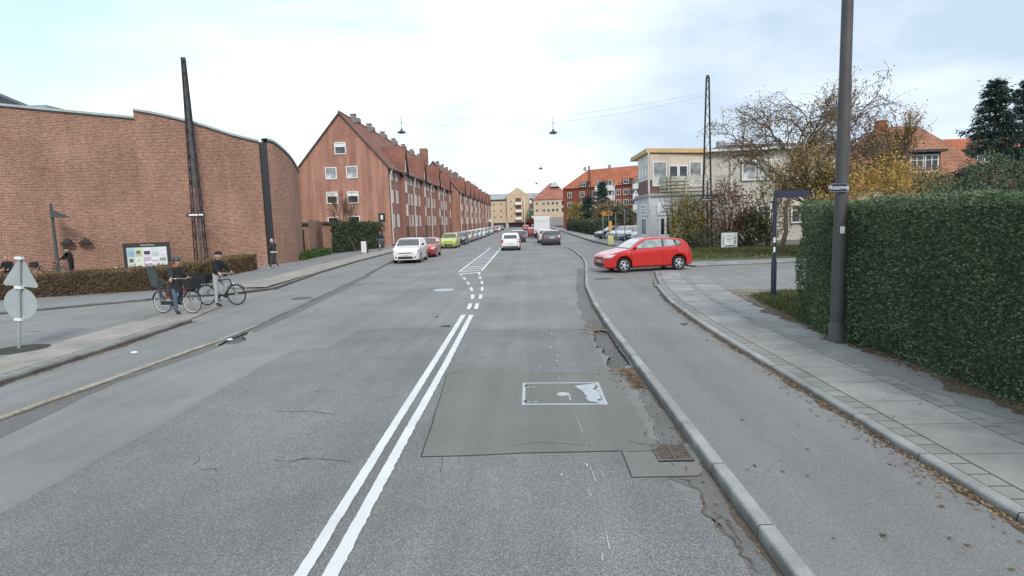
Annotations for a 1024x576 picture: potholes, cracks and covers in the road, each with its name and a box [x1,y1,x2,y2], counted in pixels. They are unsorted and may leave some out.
pothole [217,330,251,346]
crack [680,478,759,572]
drain grate [650,444,695,462]
